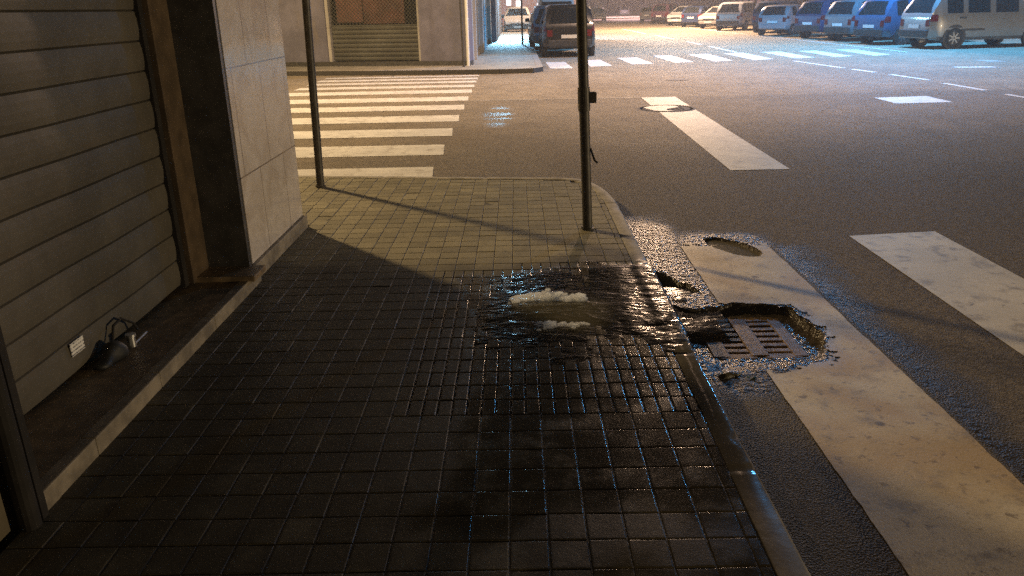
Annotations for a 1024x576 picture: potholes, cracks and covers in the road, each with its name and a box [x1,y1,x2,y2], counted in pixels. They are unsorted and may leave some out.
pothole [655,271,701,295]
pothole [705,240,759,257]
pothole [670,304,828,378]
drain grate [693,317,809,359]
